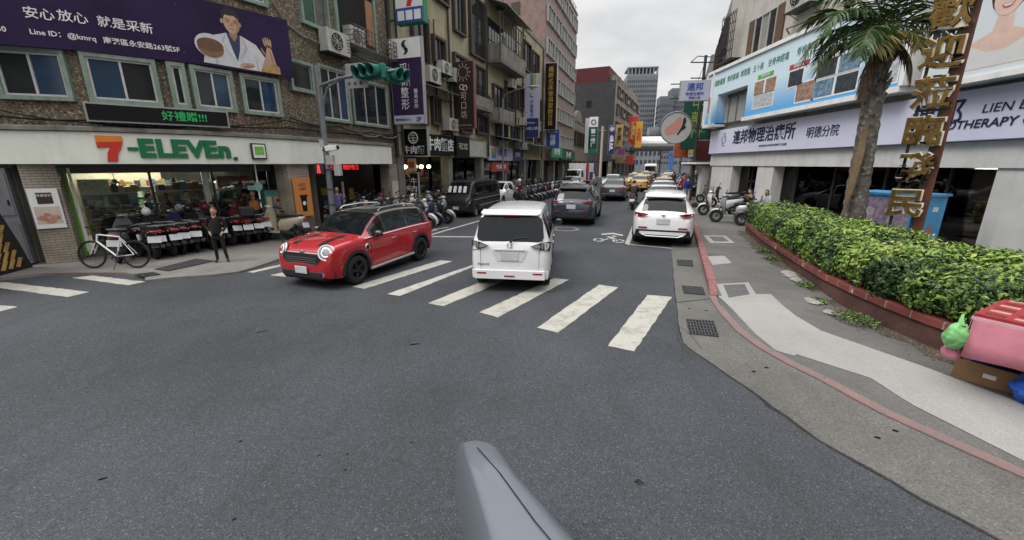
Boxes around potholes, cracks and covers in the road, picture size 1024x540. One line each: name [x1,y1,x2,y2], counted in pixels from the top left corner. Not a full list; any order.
drain grate [686,319,719,337]
drain grate [682,285,705,295]
manhole cover [716,282,757,299]
manhole cover [703,235,734,243]
